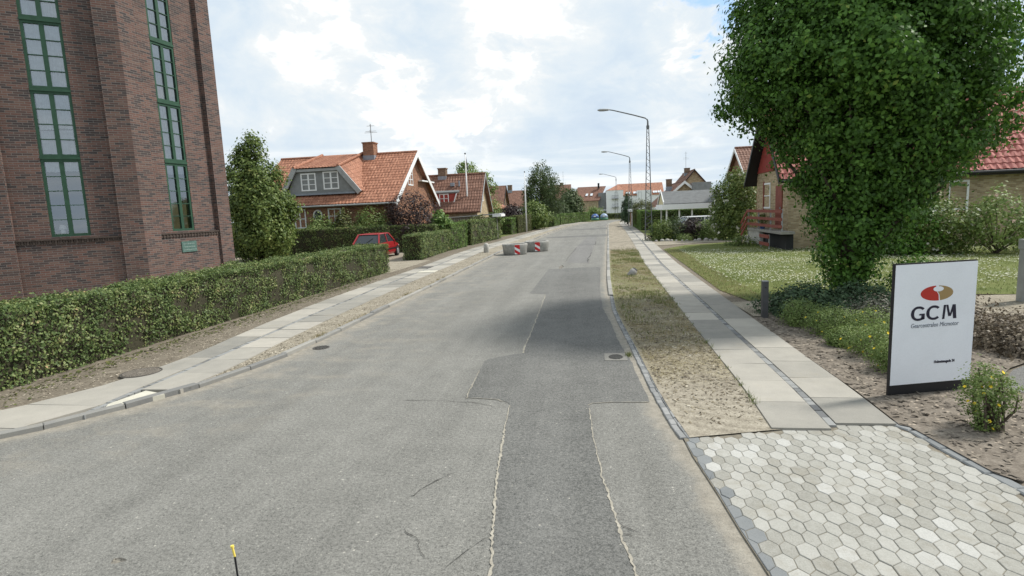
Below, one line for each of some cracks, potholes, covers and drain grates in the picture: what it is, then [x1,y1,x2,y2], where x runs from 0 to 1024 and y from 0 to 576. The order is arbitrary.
manhole cover [119,367,163,379]
